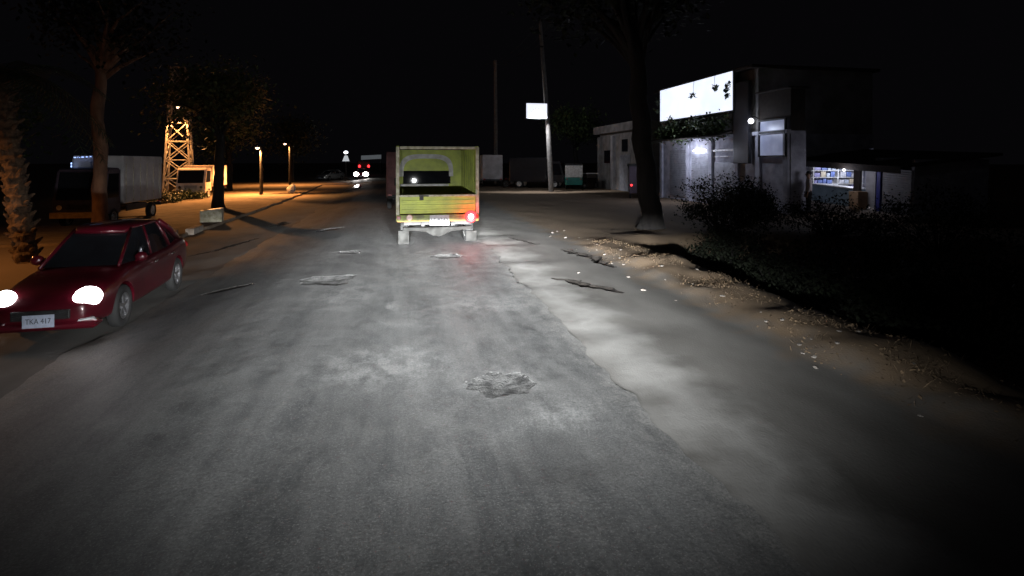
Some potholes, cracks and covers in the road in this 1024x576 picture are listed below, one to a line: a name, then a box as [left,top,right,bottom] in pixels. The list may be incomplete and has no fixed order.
pothole [463,372,537,399]
pothole [551,278,624,293]
pothole [299,275,357,286]
pothole [560,249,617,268]
